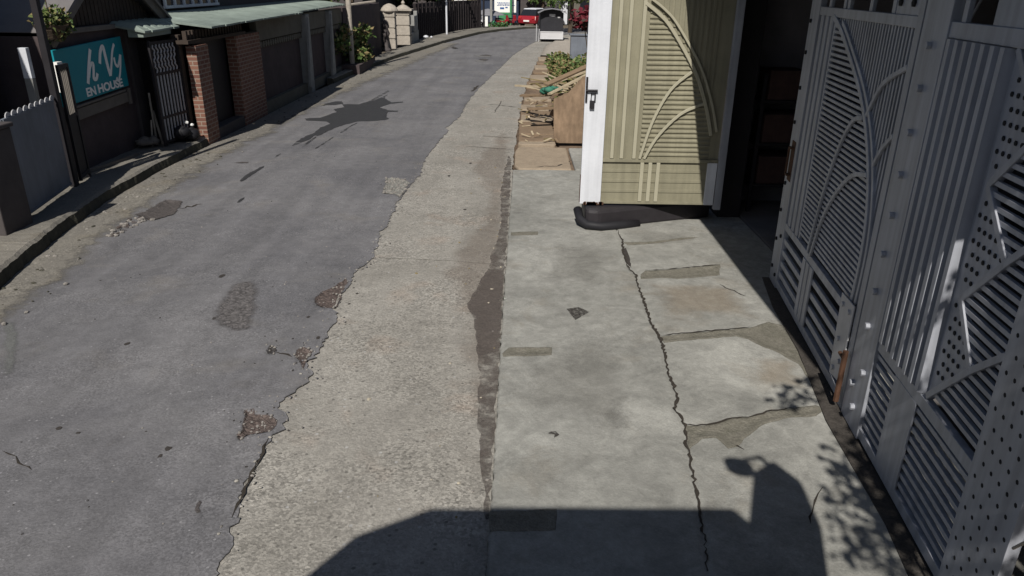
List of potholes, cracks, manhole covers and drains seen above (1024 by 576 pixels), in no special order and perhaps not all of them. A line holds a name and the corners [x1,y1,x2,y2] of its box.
pothole [237,409,277,440]
crack [231,437,269,518]
pothole [315,279,349,309]
pothole [567,307,588,320]
pothole [293,347,313,368]
crack [616,229,793,571]
